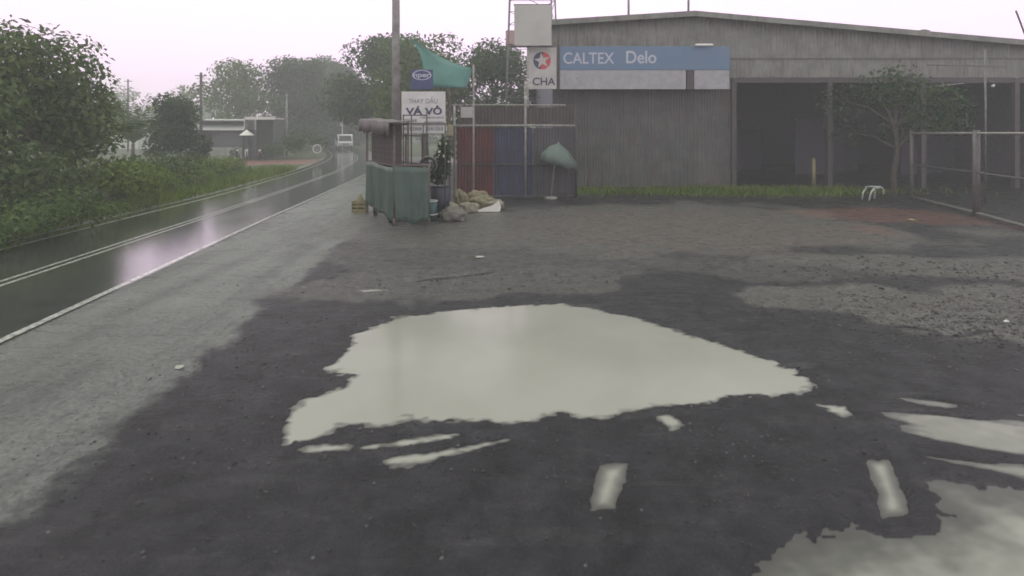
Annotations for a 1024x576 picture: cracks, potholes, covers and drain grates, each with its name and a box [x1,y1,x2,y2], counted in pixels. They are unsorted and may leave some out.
crack [412,270,503,284]
